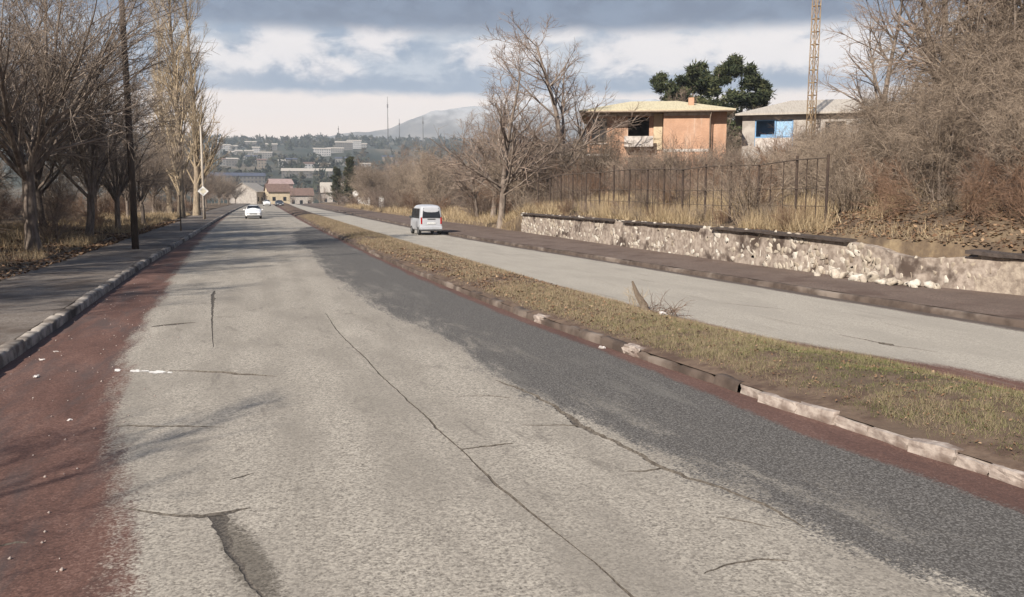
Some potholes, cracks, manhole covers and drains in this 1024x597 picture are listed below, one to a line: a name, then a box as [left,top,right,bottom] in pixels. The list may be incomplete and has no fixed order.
crack [124,508,265,597]
crack [326,314,805,597]
crack [152,291,216,347]
